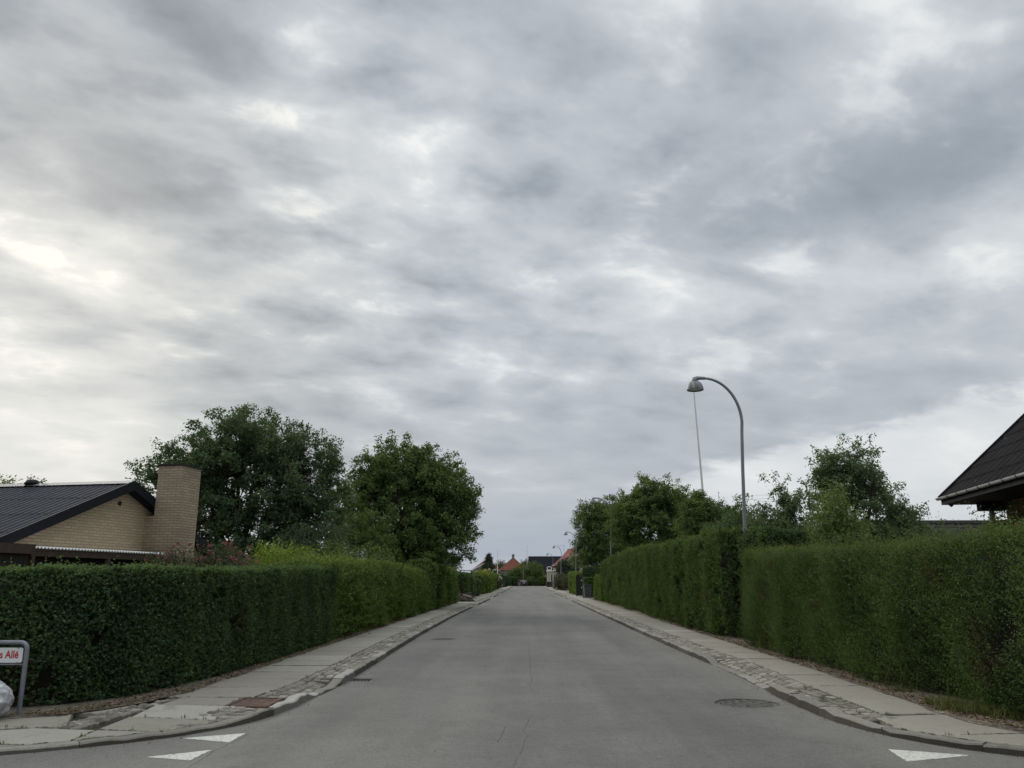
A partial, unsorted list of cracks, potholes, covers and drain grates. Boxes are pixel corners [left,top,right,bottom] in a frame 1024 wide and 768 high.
manhole cover [714,698,780,708]
